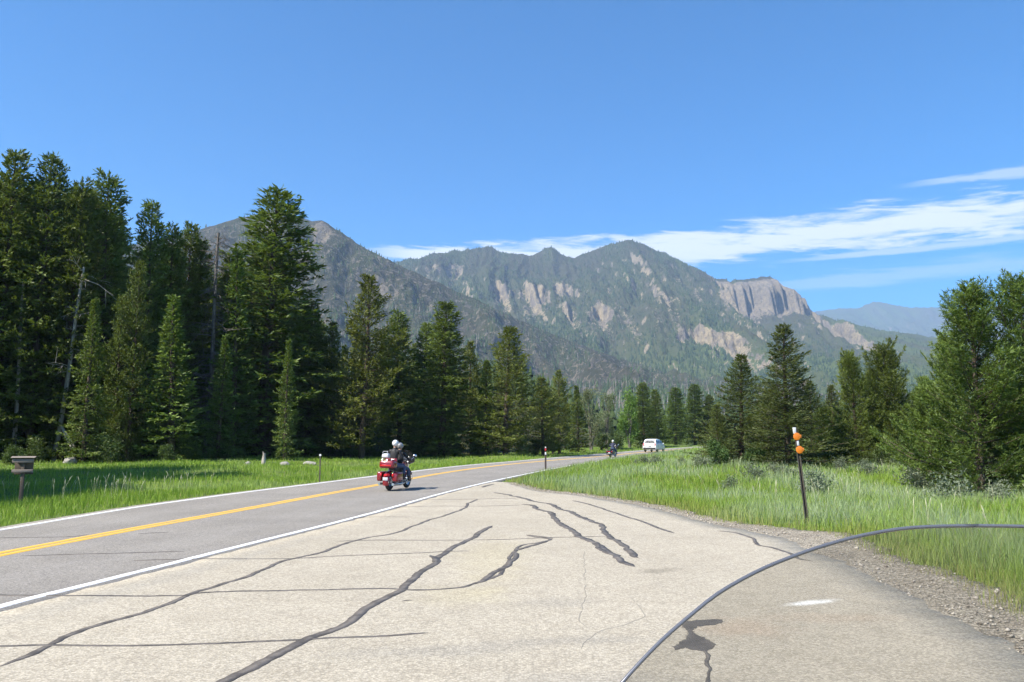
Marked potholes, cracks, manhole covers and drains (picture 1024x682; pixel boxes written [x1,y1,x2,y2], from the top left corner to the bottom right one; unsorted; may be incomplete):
crack [578,551,646,649]
